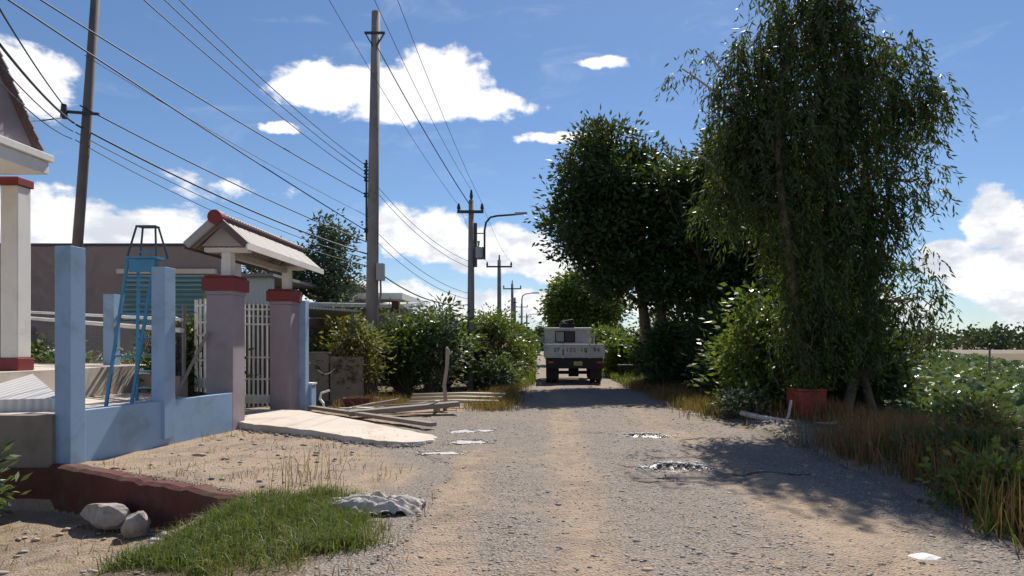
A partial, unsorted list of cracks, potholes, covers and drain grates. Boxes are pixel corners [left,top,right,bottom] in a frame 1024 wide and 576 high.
pothole [635,460,715,473]
